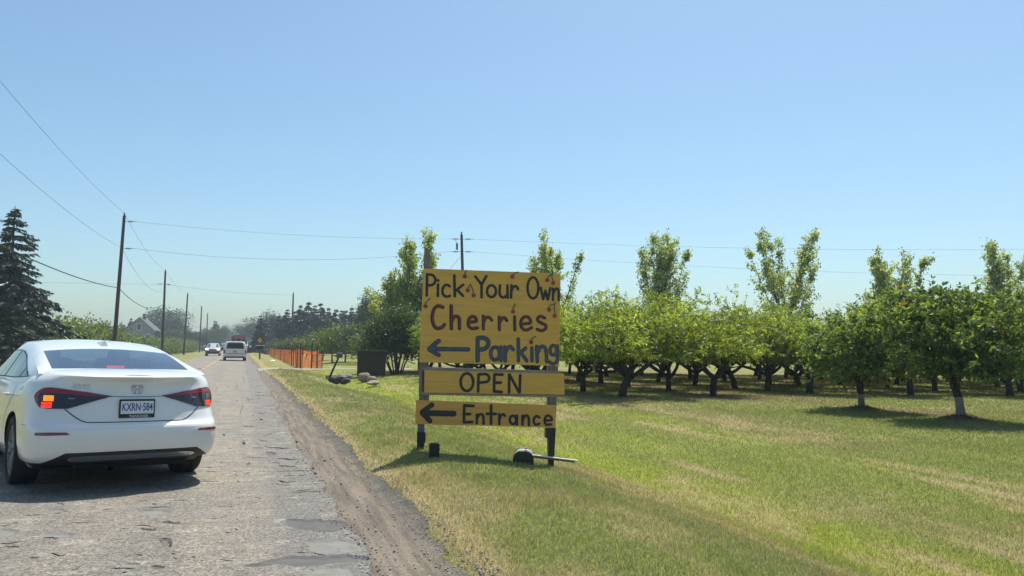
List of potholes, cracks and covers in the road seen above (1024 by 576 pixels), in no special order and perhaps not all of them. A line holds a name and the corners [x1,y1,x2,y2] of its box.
crack [207,377,319,533]
